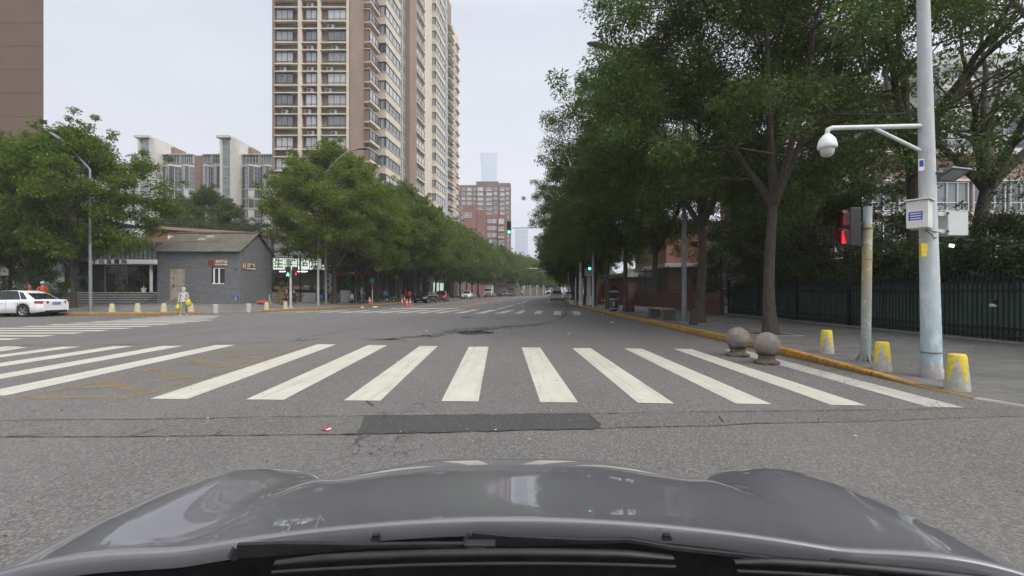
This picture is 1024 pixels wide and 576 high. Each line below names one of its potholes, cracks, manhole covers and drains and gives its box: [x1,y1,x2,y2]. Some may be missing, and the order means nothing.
crack [358,305,568,342]
